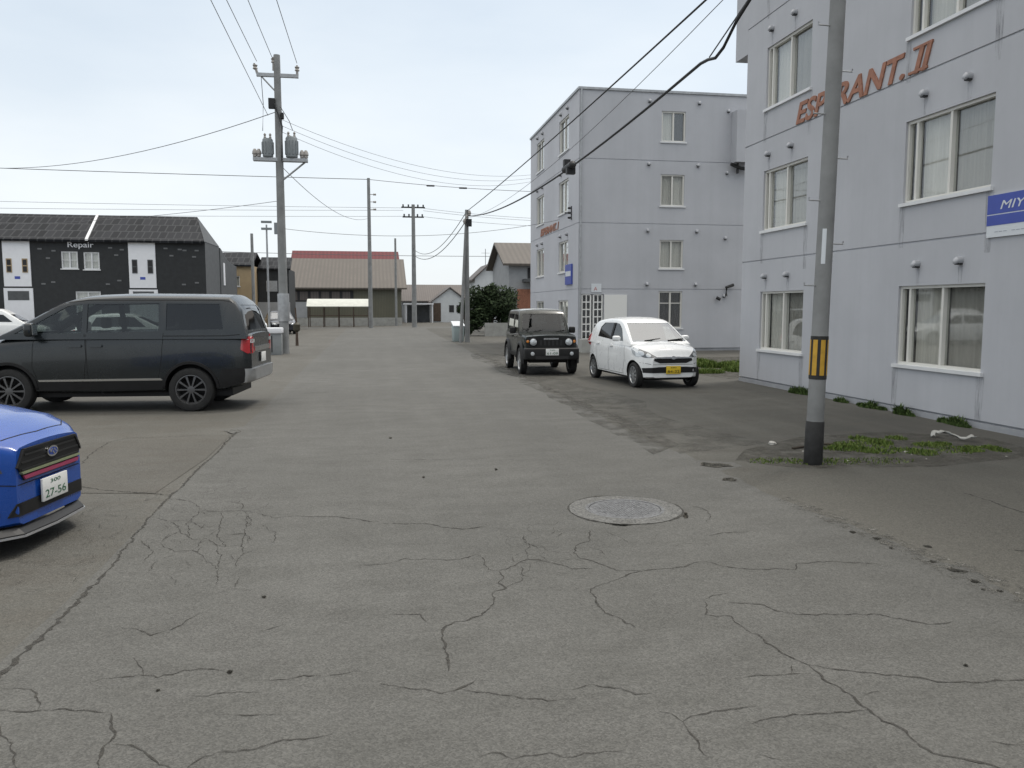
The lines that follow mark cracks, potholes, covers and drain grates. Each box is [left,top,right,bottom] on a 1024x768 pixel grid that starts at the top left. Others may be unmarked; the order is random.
crack [91,658,224,682]
crack [2,480,487,592]
crack [372,521,876,701]
crack [192,670,358,696]
crack [705,594,1024,768]
crack [0,688,170,768]
crack [479,749,626,759]
manhole cover [567,496,684,525]
crack [187,734,330,768]
crack [660,706,752,758]
